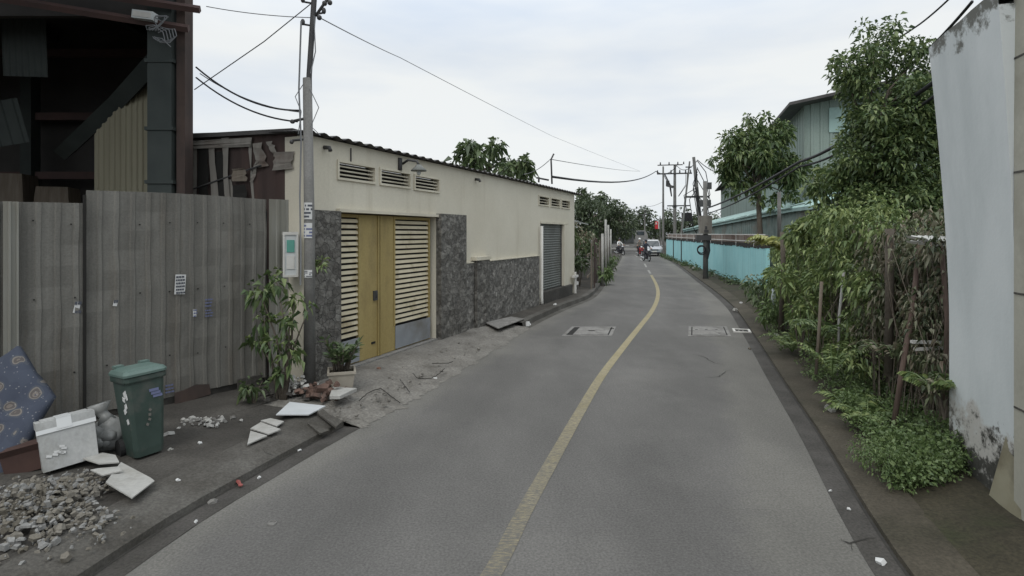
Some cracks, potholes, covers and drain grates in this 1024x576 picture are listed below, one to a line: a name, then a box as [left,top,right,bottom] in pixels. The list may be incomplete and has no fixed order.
manhole cover [688,326,731,336]
manhole cover [562,326,616,336]
